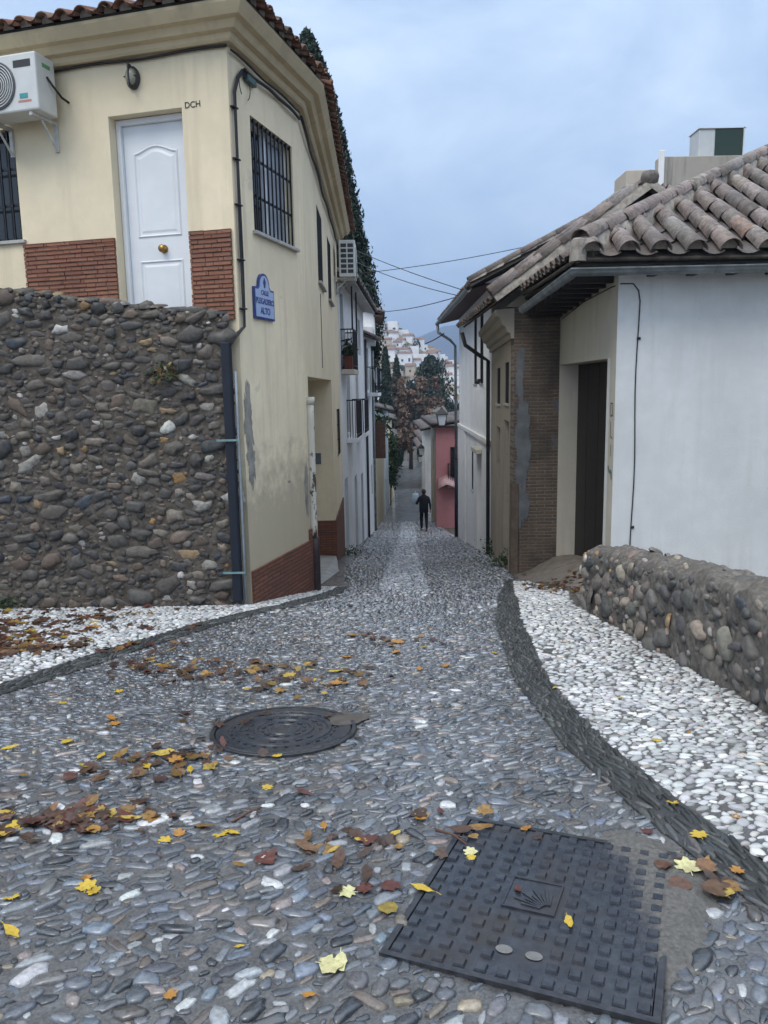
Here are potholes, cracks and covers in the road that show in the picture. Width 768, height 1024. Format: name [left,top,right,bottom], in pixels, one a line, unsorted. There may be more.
manhole cover [210,706,370,758]
manhole cover [379,816,721,1024]
